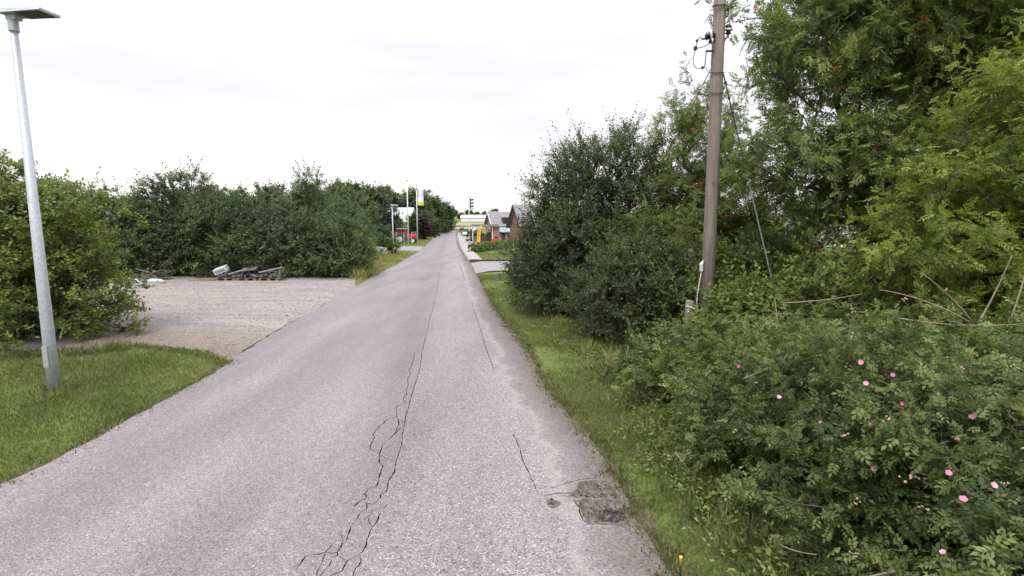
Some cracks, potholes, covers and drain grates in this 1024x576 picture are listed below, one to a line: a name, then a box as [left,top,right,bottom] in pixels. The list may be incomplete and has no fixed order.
crack [296,268,442,576]
pothole [576,498,639,527]
crack [513,434,626,527]
pothole [546,498,561,508]
